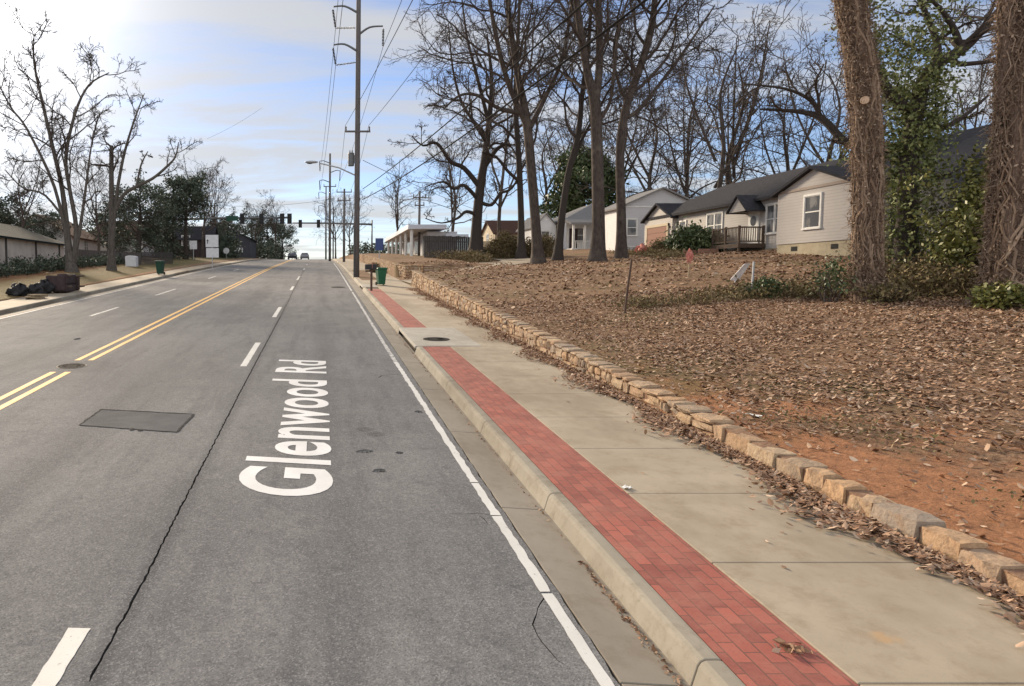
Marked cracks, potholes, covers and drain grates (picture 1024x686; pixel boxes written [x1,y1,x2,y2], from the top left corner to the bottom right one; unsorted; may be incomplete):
crack [89,270,304,682]
crack [532,598,568,667]
